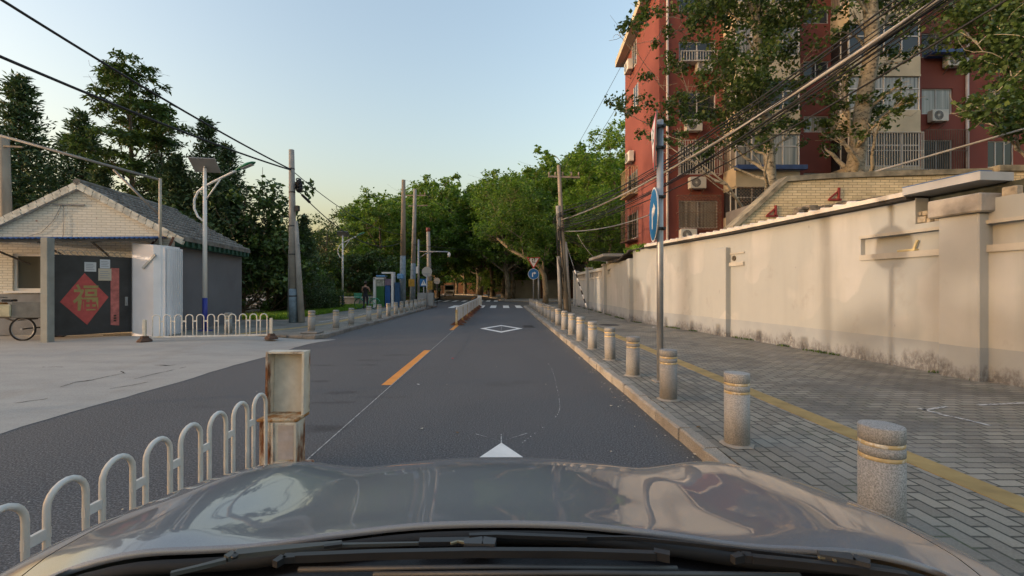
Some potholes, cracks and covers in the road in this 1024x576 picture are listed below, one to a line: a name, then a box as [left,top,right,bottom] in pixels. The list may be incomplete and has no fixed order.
crack [61,365,184,389]
